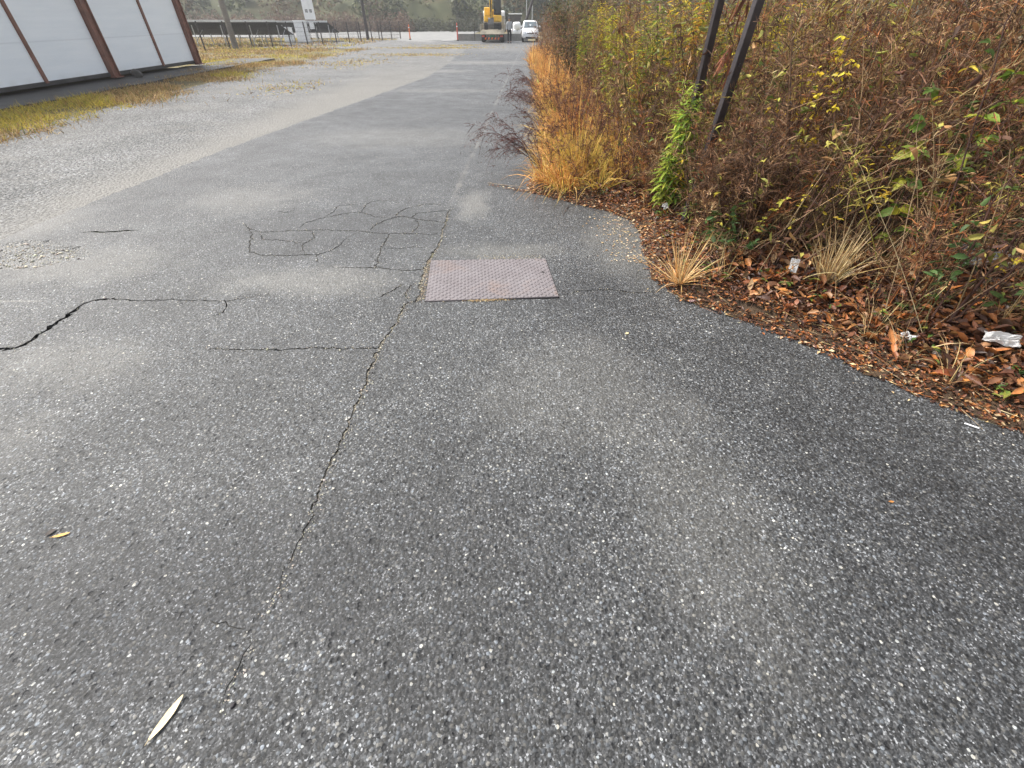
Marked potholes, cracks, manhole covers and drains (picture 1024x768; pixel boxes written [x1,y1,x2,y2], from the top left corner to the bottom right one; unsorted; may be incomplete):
manhole cover [425,258,560,302]
crack [243,201,448,297]
crack [0,293,270,352]
